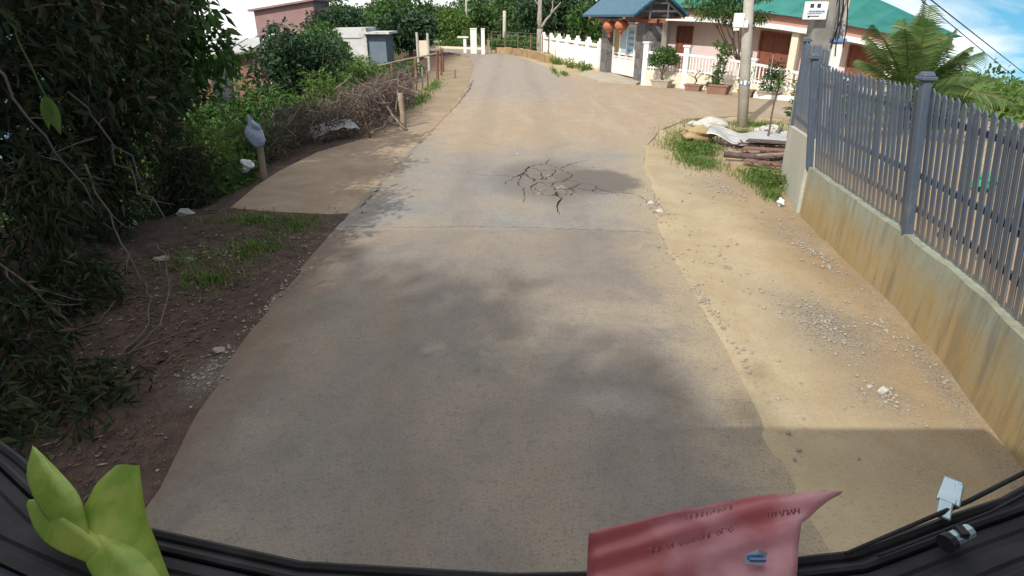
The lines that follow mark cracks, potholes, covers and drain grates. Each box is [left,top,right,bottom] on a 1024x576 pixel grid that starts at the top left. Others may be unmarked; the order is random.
crack [505,163,574,215]
